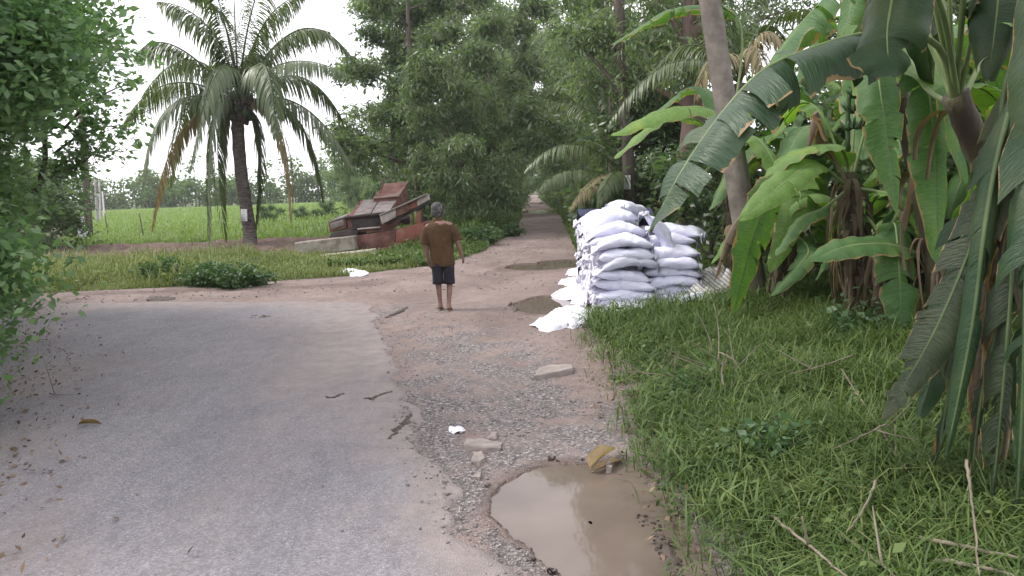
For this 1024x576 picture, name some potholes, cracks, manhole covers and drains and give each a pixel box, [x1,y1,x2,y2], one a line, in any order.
crack [364,391,413,439]
pothole [483,455,717,576]
pothole [508,295,590,315]
pothole [502,259,578,271]
